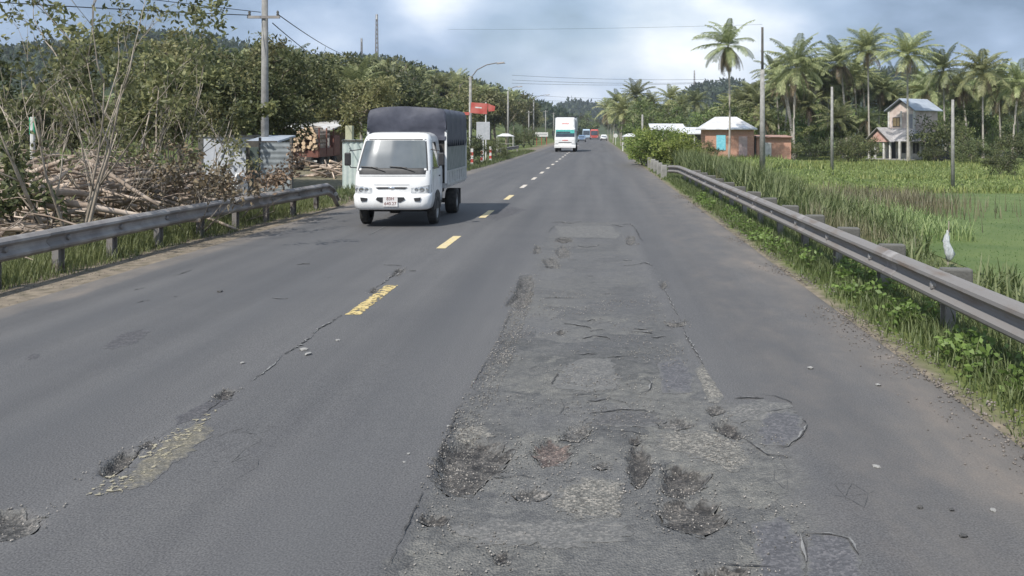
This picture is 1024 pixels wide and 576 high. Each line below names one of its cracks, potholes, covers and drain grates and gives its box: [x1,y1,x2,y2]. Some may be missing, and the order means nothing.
crack [737,393,808,488]
pothole [215,389,234,400]
pothole [626,445,653,488]
crack [564,319,688,414]
crack [800,532,859,561]
pothole [101,451,141,479]
pothole [652,498,733,539]
pothole [428,436,517,498]
pothole [506,275,534,309]
pothole [512,487,551,502]
crack [473,310,565,413]
